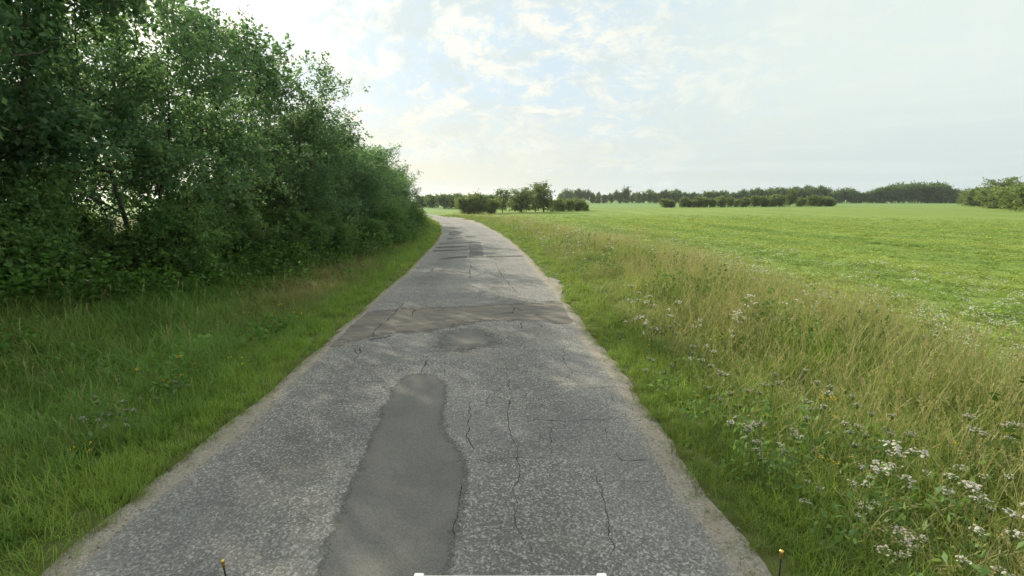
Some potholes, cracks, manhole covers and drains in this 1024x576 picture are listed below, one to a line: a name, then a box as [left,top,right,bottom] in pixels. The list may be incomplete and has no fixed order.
crack [300,303,415,393]
crack [465,348,650,572]
